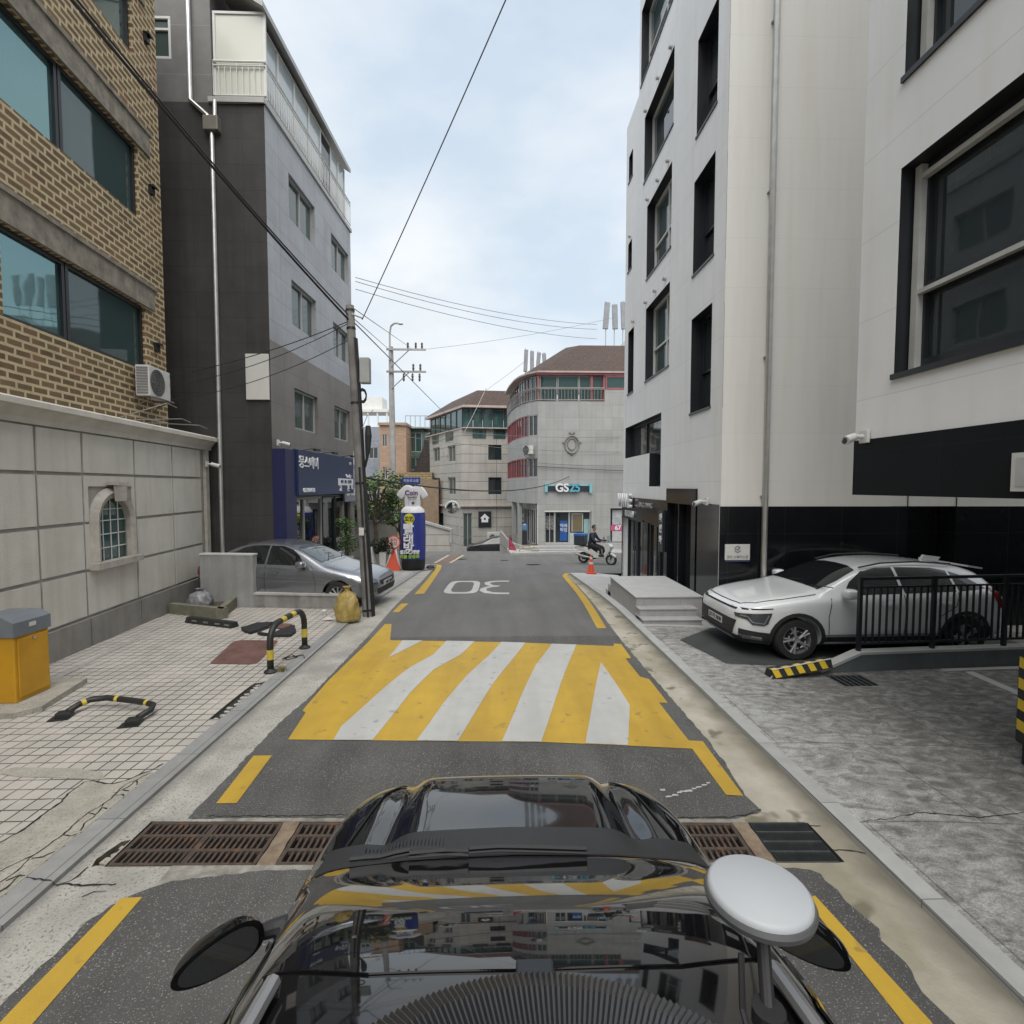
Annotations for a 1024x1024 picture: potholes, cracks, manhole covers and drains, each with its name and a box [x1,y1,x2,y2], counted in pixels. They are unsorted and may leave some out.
crack [867,812,1023,821]
drain grate [824,675,880,686]
drain grate [682,823,754,862]
crack [0,763,163,897]
drain grate [749,822,840,863]
drain grate [275,822,342,865]
pothole [92,840,130,867]
drain grate [107,822,284,866]
